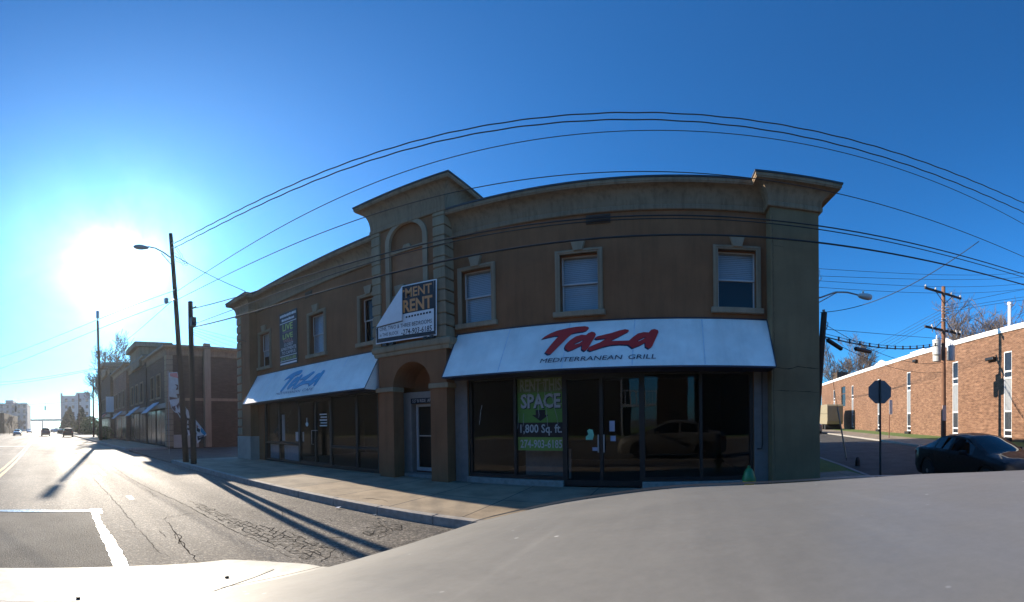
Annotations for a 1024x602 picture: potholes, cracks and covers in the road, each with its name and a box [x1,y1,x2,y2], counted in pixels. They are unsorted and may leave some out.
crack [96,466,410,561]
